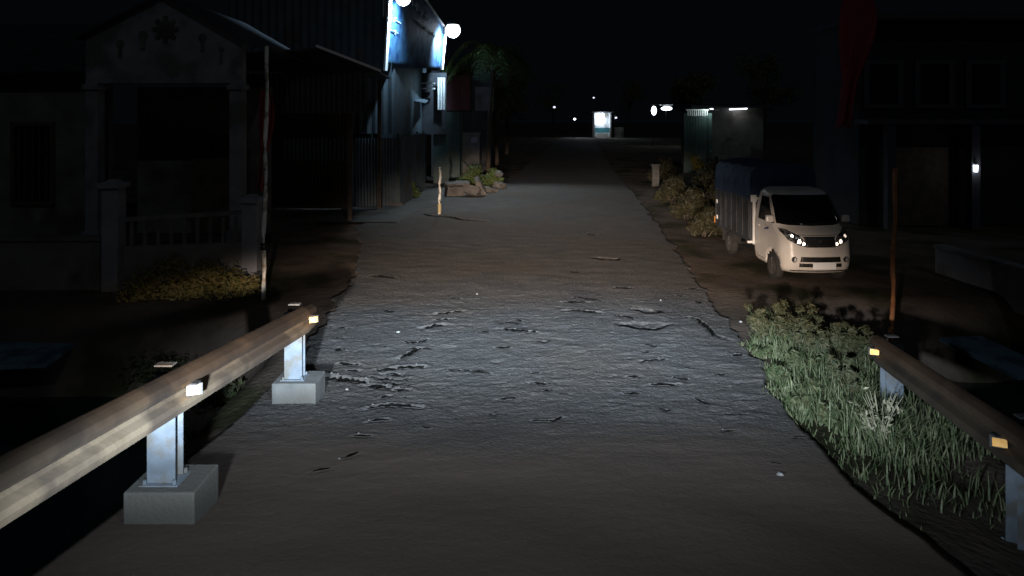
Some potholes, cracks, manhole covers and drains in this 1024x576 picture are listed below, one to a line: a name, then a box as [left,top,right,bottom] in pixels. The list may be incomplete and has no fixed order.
pothole [614,320,678,330]
crack [677,288,743,356]
pothole [373,369,410,387]
